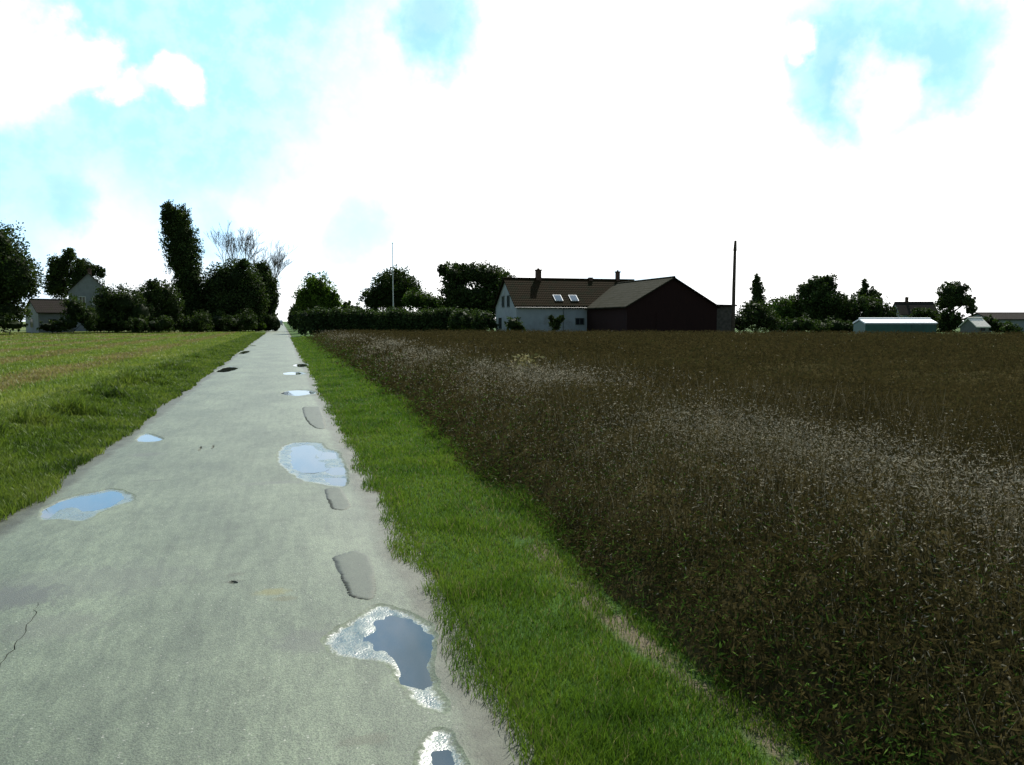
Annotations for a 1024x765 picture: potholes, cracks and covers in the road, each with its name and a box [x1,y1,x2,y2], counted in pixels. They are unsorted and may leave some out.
pothole [275,442,350,487]
pothole [37,488,137,522]
pothole [135,433,165,442]
pothole [320,603,451,714]
pothole [412,727,471,765]
crack [0,606,38,664]
